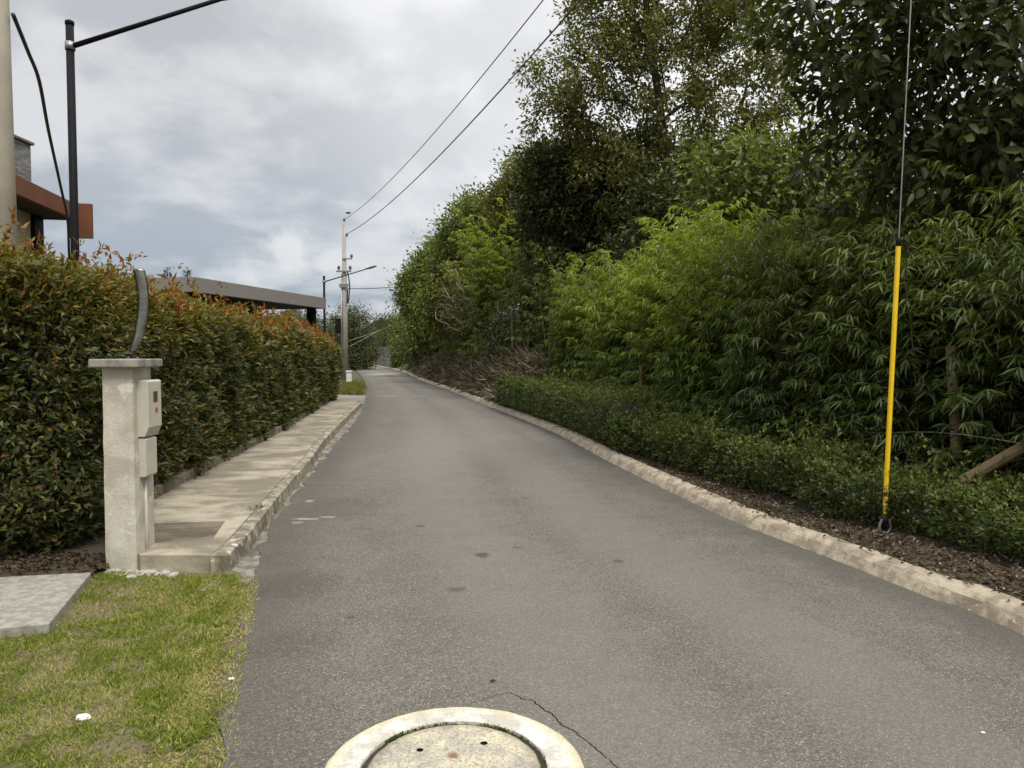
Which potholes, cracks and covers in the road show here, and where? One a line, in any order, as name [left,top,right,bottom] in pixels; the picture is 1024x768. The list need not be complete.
crack [473,692,619,768]
manhole cover [325,707,584,768]
